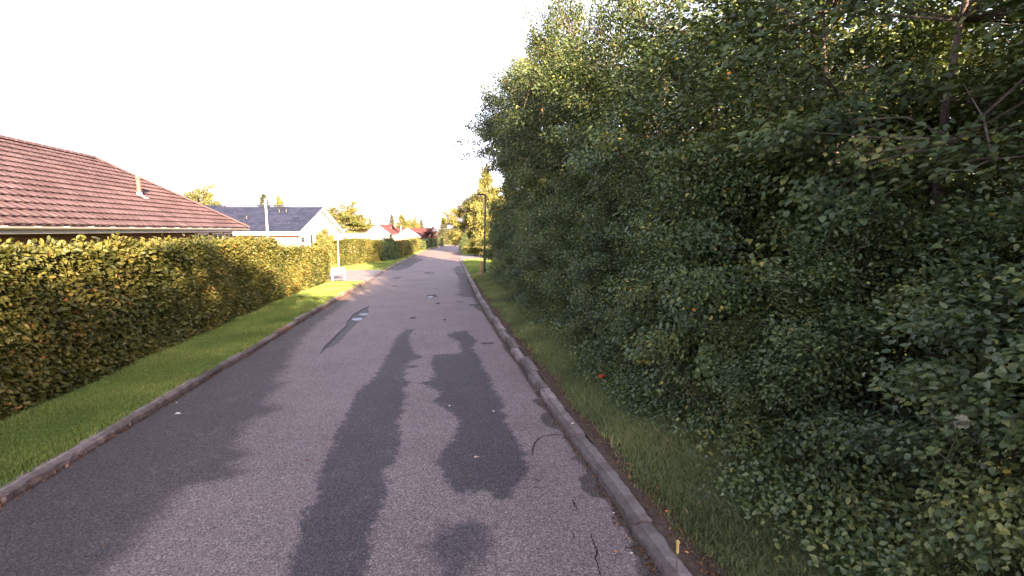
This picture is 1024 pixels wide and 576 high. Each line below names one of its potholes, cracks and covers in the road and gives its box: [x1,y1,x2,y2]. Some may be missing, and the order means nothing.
pothole [313,304,375,357]
crack [573,531,601,576]
